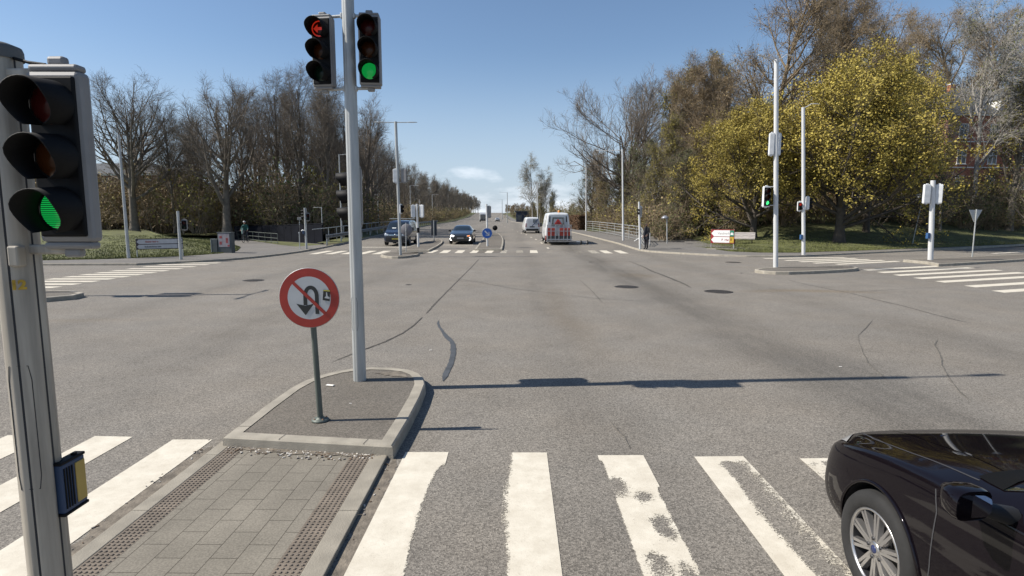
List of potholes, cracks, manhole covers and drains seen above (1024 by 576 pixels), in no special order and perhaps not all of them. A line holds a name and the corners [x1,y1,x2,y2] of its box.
crack [934,341,969,399]
